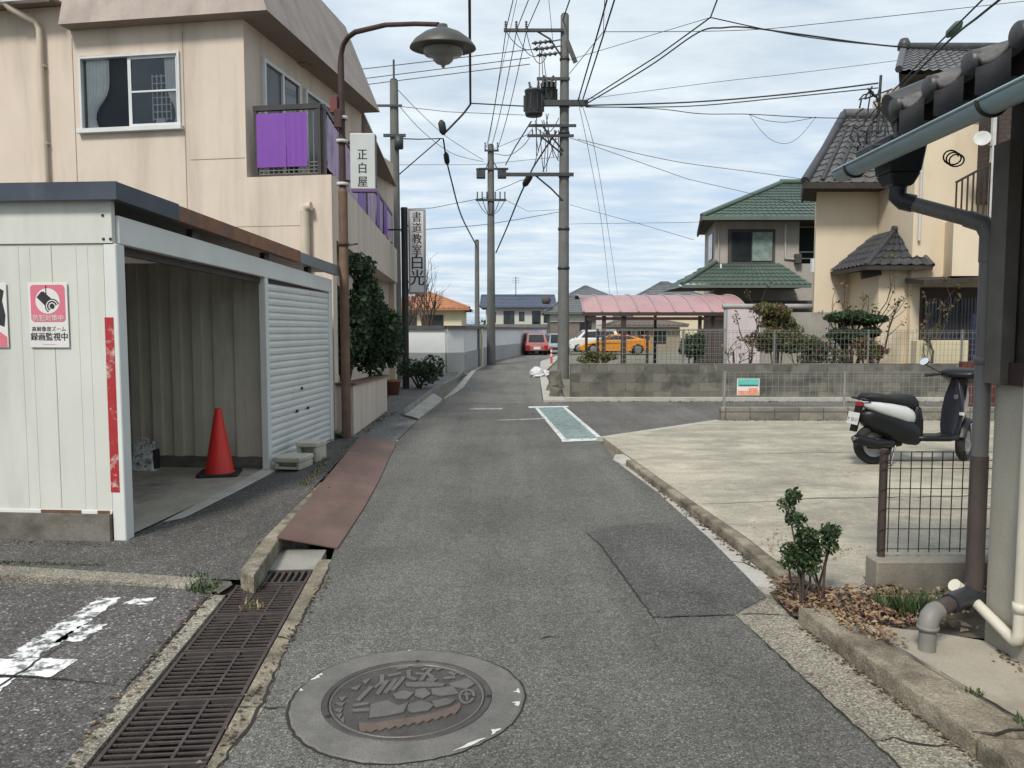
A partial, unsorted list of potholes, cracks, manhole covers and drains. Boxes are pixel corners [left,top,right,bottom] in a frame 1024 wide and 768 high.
drain grate [91,697,243,766]
manhole cover [285,650,526,765]
drain grate [144,649,269,701]
drain grate [183,613,289,652]
drain grate [260,569,313,585]
drain grate [213,583,305,615]
